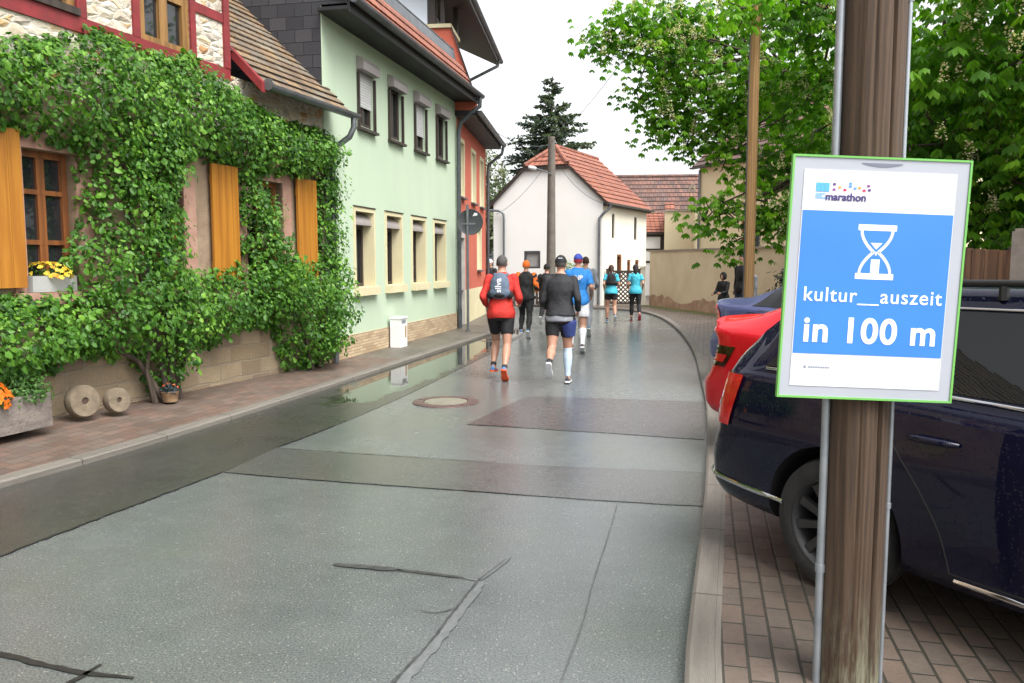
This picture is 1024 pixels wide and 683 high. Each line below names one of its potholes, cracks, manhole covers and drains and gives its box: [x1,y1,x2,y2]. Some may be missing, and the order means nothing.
manhole cover [412,396,479,408]
